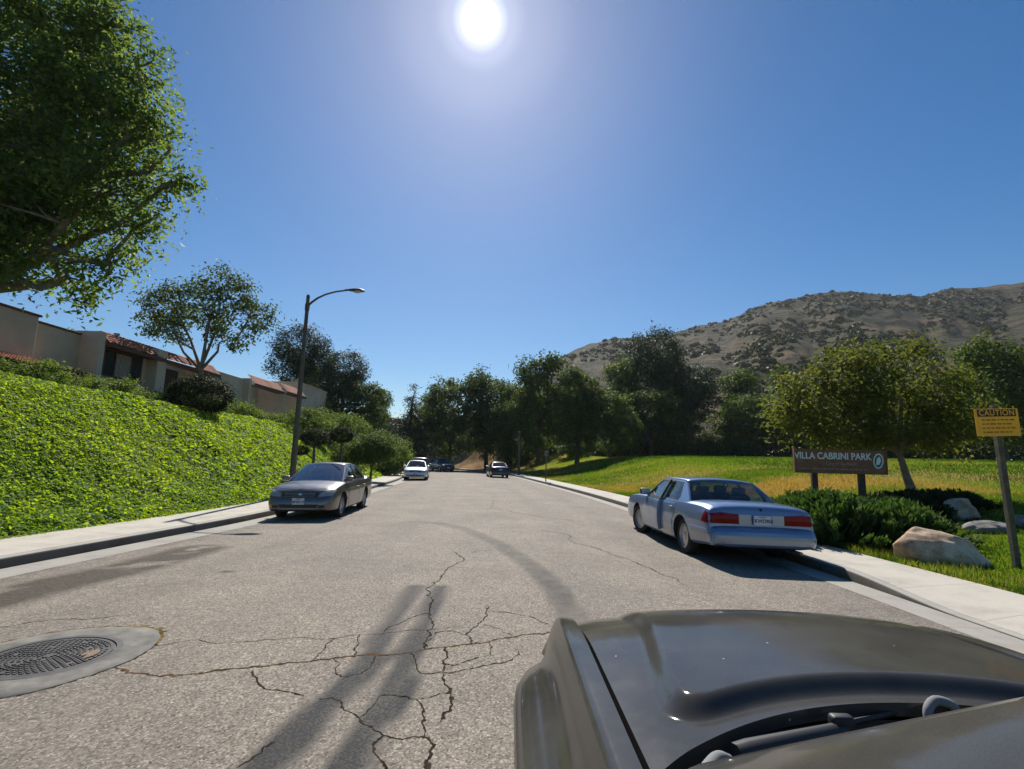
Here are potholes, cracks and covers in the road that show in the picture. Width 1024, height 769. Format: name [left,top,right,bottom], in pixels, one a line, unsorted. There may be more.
crack [490,493,687,586]
manhole cover [0,626,161,698]
crack [0,552,550,769]
